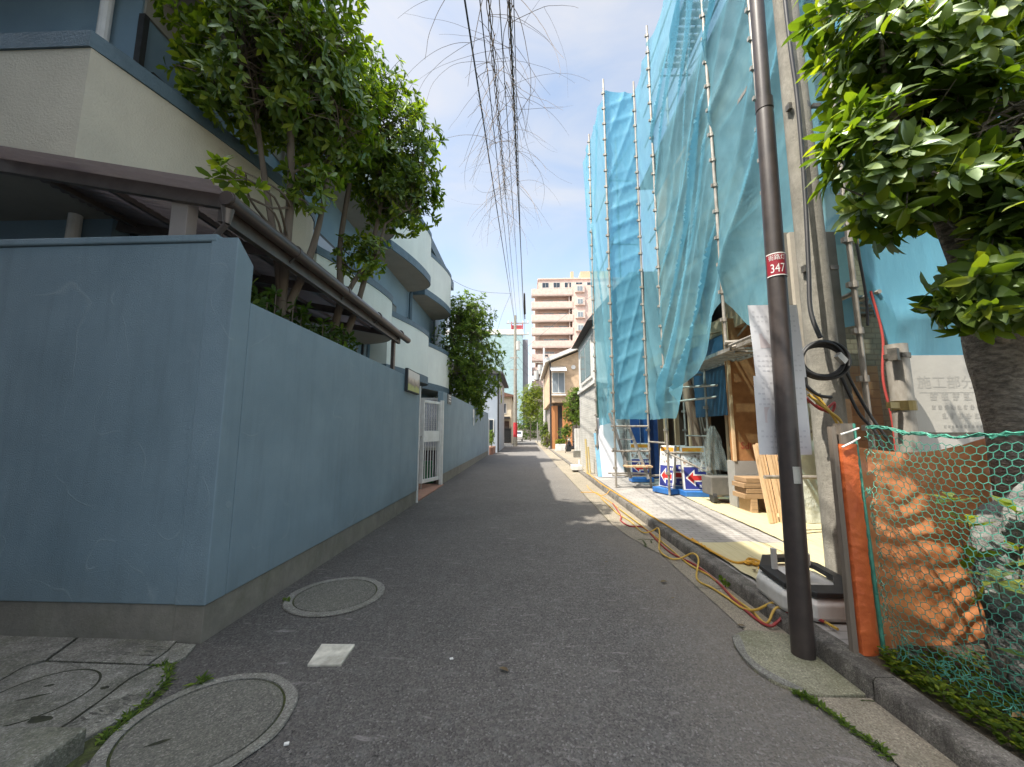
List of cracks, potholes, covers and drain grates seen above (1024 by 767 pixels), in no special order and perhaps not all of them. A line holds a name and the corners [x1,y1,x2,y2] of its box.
manhole cover [282,577,385,617]
manhole cover [88,673,298,767]
